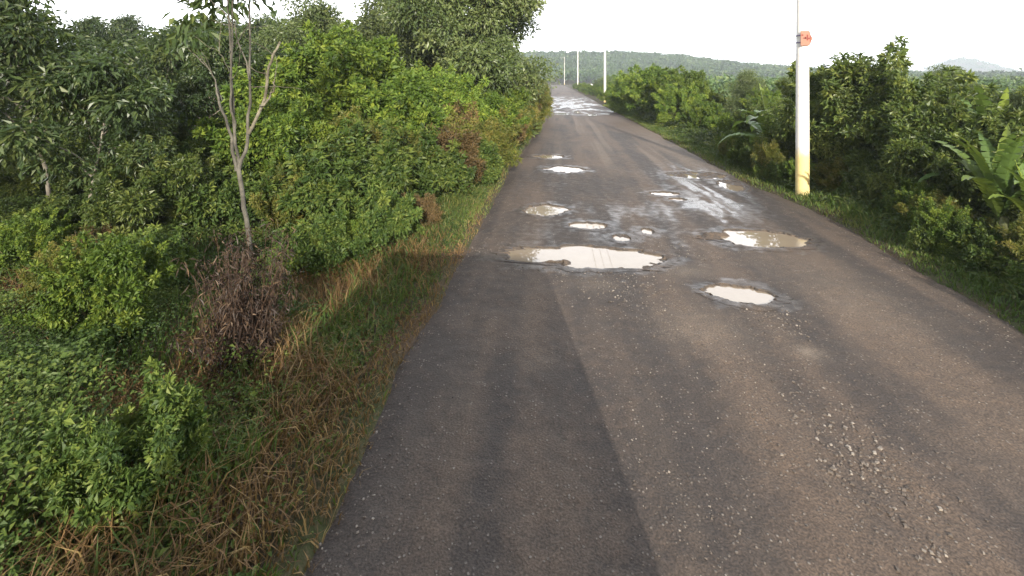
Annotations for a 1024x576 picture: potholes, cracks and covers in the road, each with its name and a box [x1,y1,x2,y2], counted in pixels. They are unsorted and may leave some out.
pothole [603,232,638,244]
pothole [515,202,578,218]
pothole [559,219,617,232]
pothole [692,278,794,311]
pothole [534,165,590,174]
pothole [686,226,823,252]
pothole [490,241,681,273]
pothole [633,226,662,238]
